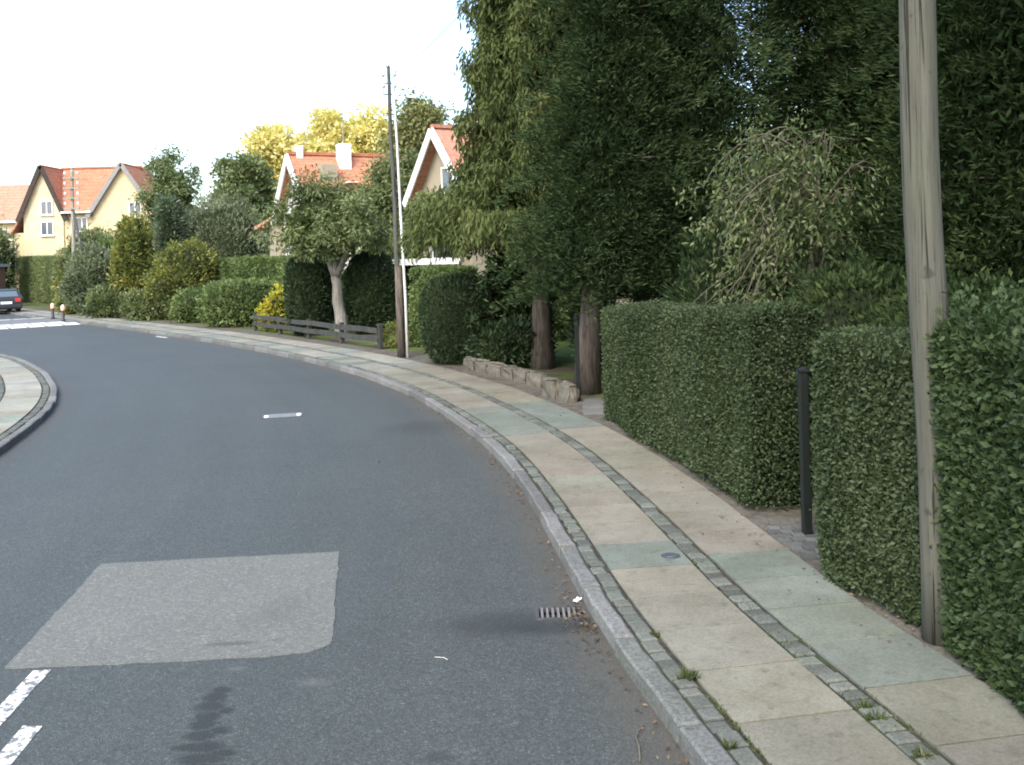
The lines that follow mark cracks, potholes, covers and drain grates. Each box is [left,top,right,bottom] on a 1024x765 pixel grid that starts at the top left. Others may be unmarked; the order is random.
drain grate [535,605,583,620]
